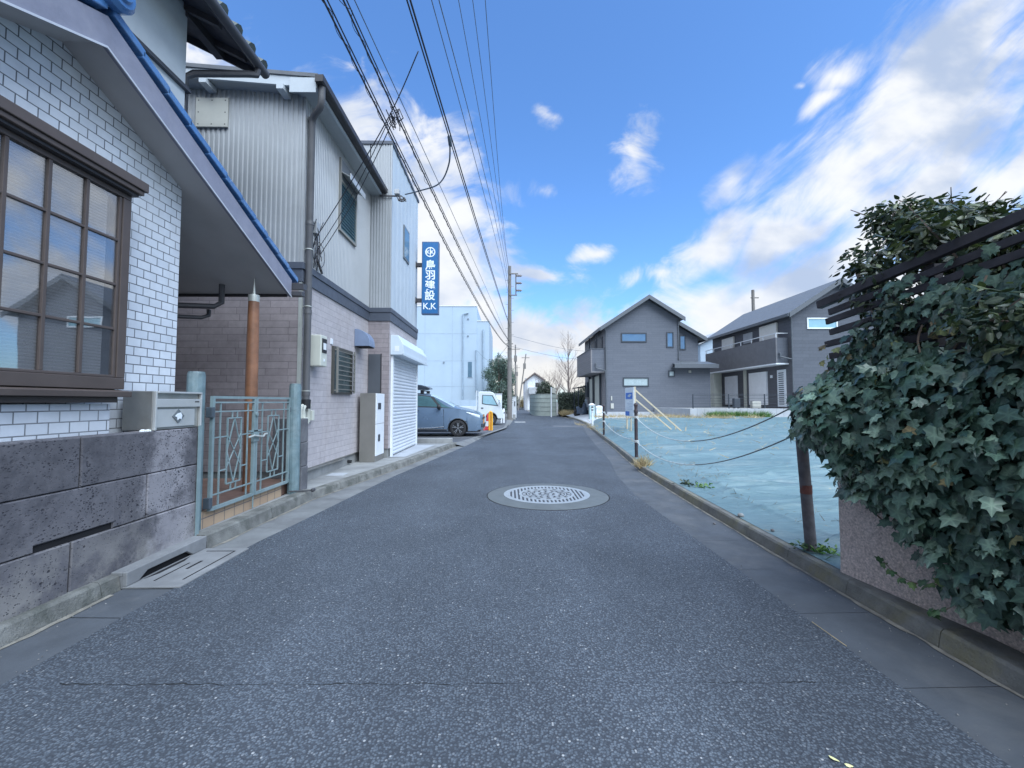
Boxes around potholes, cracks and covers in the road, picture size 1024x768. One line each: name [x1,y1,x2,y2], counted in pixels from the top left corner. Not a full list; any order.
manhole cover [487,483,610,511]
drain grate [111,536,249,590]
